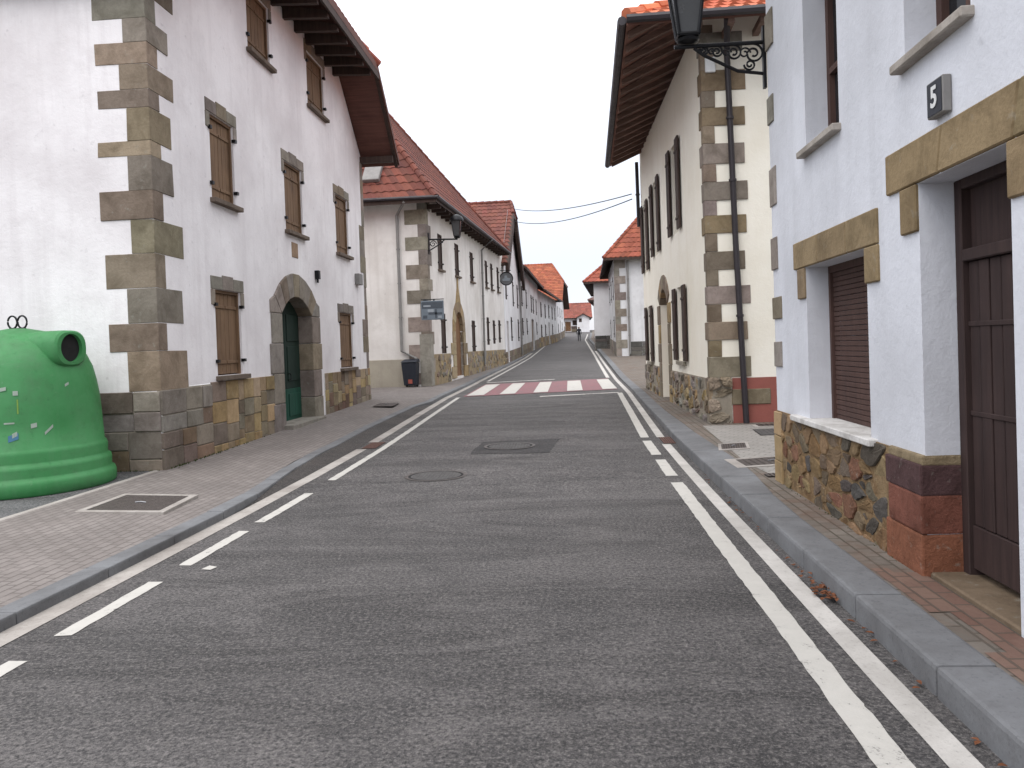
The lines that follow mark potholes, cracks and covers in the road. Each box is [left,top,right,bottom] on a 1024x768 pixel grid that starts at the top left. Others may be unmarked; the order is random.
utility cover [75,494,198,515]
manhole cover [405,470,467,481]
